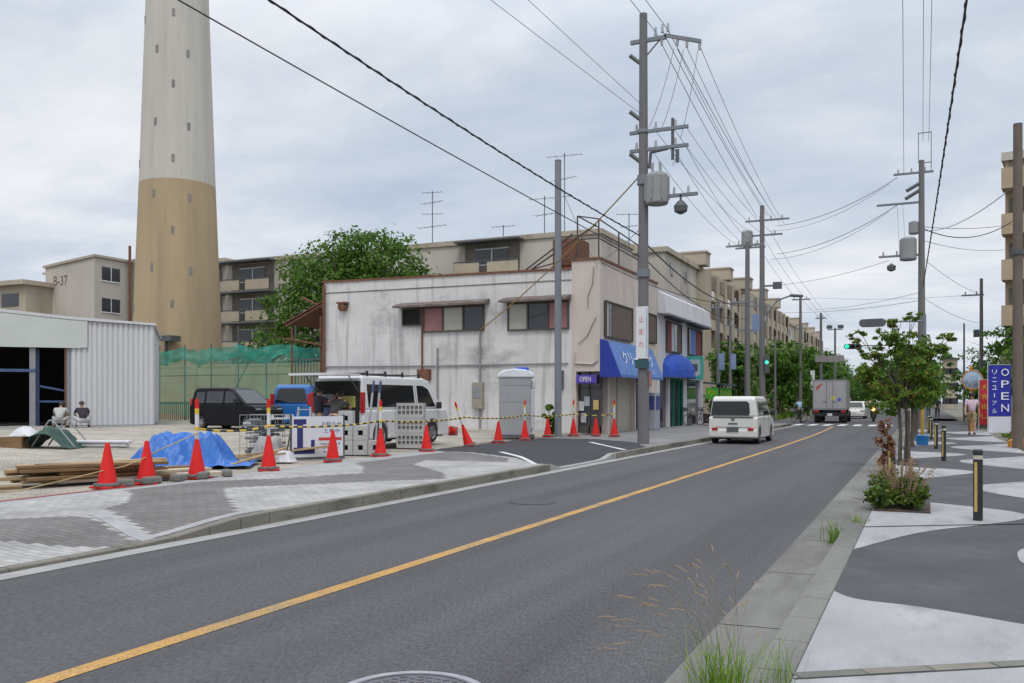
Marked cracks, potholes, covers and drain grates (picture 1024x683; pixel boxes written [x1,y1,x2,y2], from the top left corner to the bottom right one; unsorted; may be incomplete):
manhole cover [349,671,480,683]
